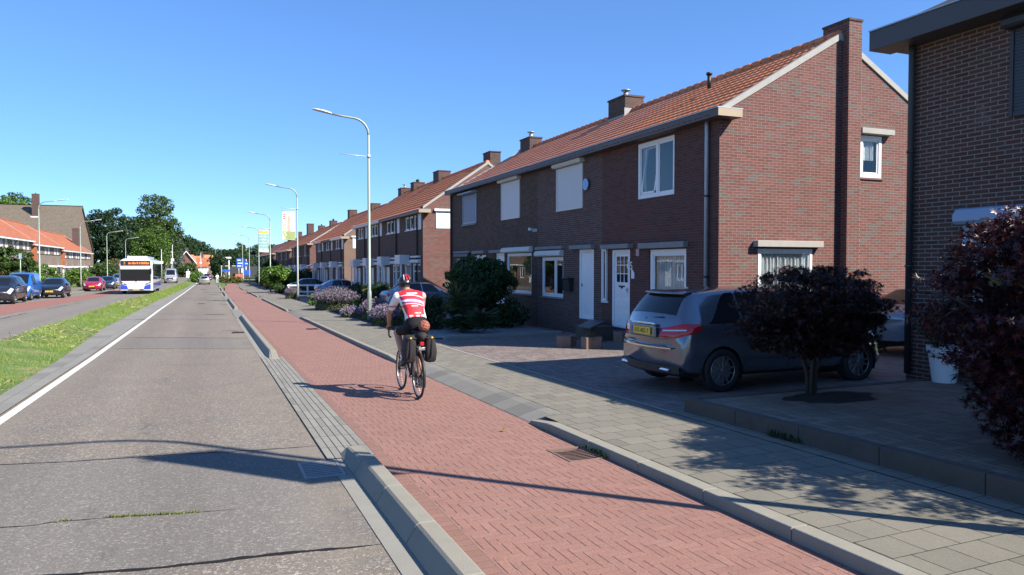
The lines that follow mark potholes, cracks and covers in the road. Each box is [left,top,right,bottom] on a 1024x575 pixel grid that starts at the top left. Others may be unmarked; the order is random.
drain grate [547,446,606,462]
drain grate [297,459,347,480]
